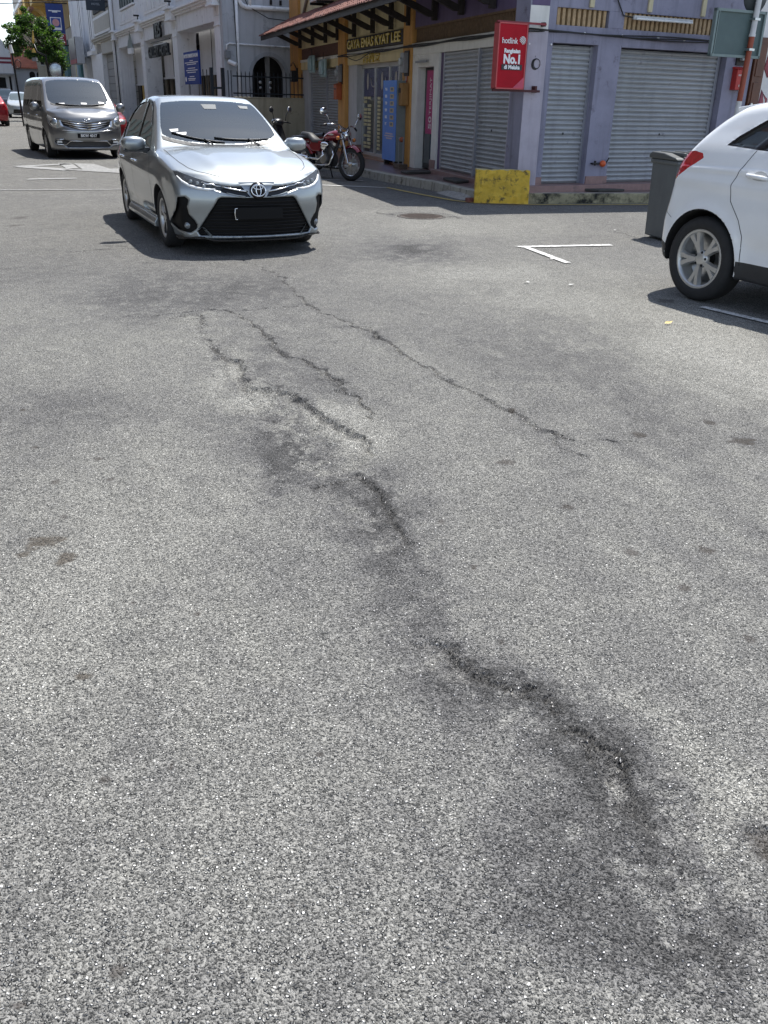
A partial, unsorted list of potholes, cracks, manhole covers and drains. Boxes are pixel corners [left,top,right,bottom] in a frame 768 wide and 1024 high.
crack [222,259,620,457]
